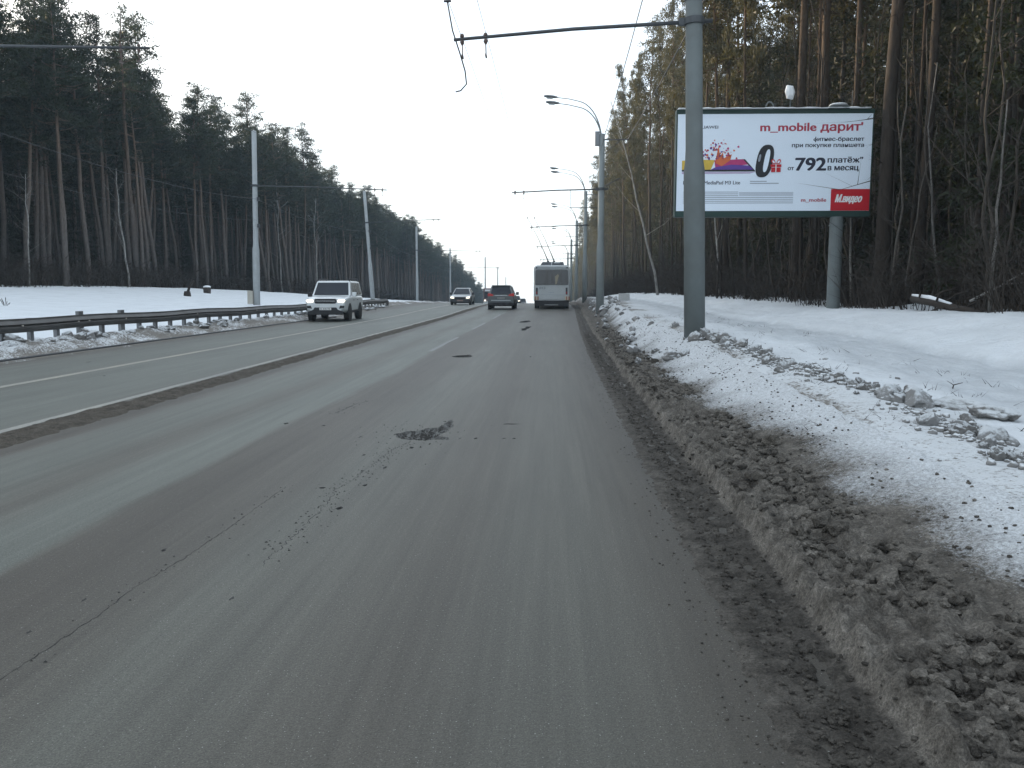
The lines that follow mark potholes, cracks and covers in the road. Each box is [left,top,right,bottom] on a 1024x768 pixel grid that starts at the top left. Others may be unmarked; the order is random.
crack [0,485,293,680]
pothole [360,414,492,450]
